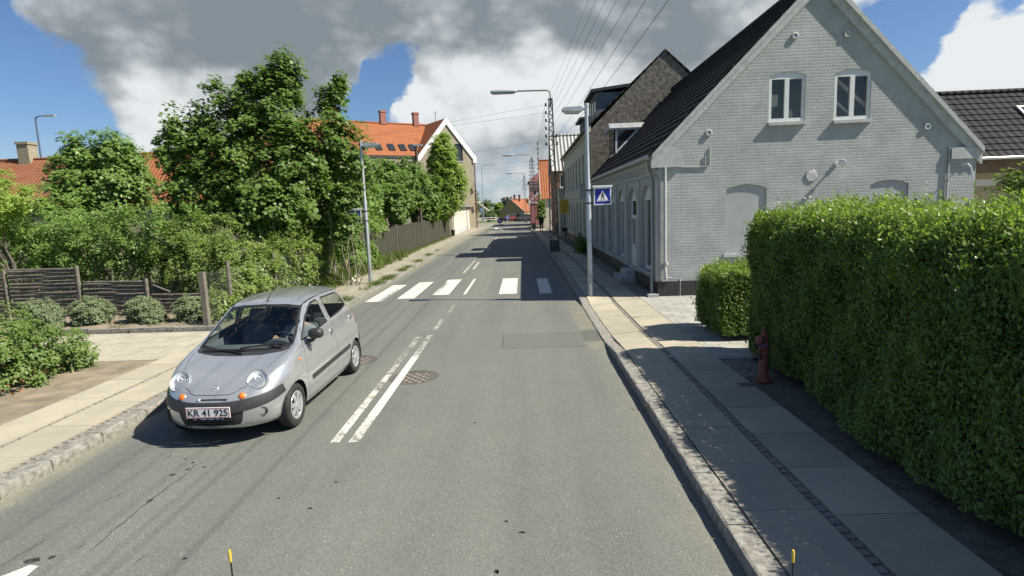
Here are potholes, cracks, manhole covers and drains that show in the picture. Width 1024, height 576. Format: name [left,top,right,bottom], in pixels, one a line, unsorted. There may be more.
crack [76,455,202,565]
manhole cover [388,370,439,385]
manhole cover [360,355,378,366]
